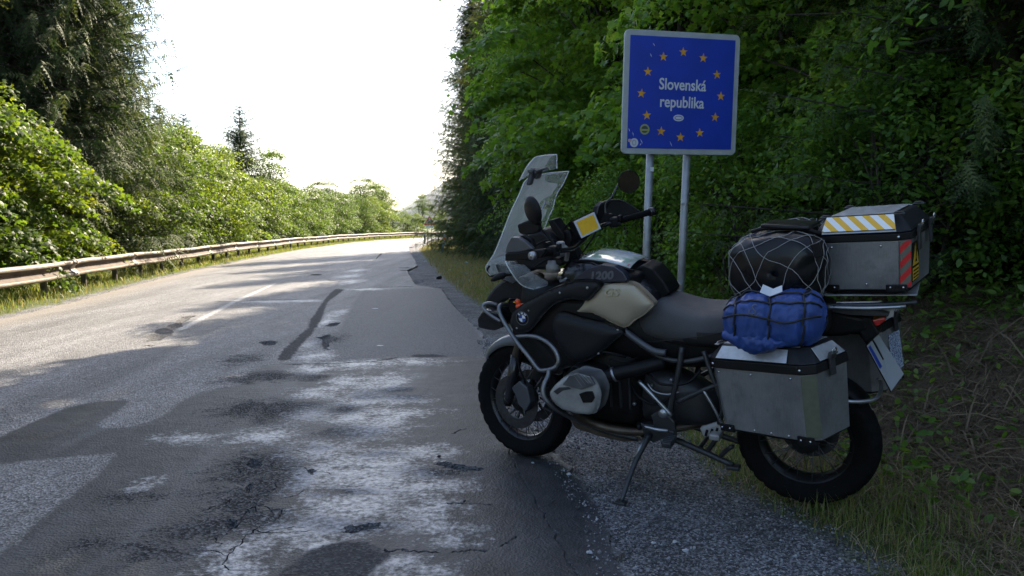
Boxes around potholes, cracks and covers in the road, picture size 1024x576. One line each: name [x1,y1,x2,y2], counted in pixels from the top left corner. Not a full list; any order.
pothole [343,522,381,534]
pothole [144,316,195,342]
crack [383,449,581,576]
crack [194,450,330,571]
pothole [434,461,486,471]
pothole [316,334,331,350]
